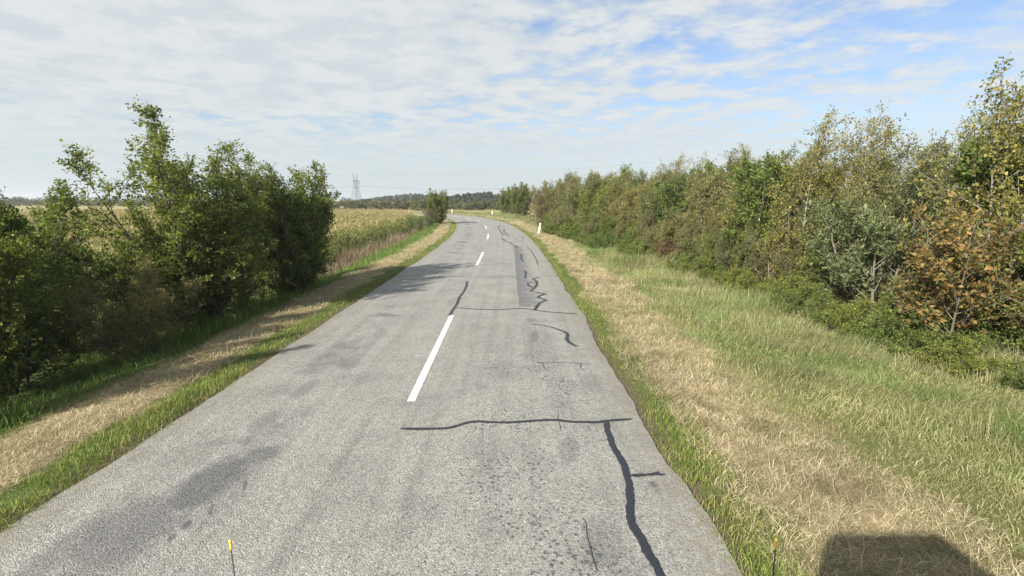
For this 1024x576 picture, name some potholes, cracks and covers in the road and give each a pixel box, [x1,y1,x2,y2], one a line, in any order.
crack [581,517,598,571]
